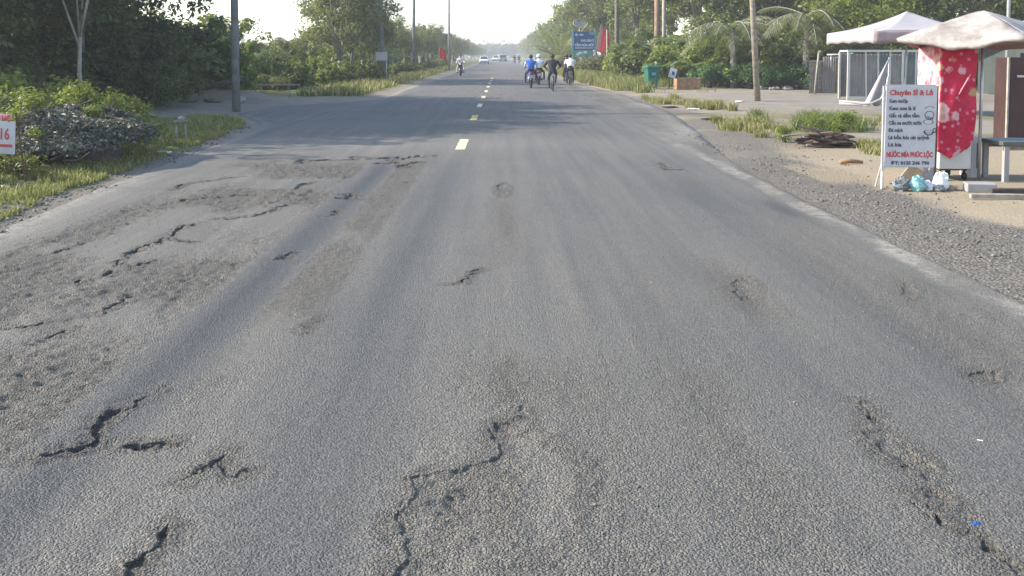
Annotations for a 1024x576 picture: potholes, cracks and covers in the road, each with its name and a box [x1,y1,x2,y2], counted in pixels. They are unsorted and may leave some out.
pothole [494,182,513,198]
pothole [725,276,766,303]
crack [904,489,1024,576]
crack [117,520,185,576]
crack [0,176,366,345]
crack [851,398,888,429]
pothole [959,368,1008,386]
crack [293,155,438,184]
crack [24,384,261,487]
